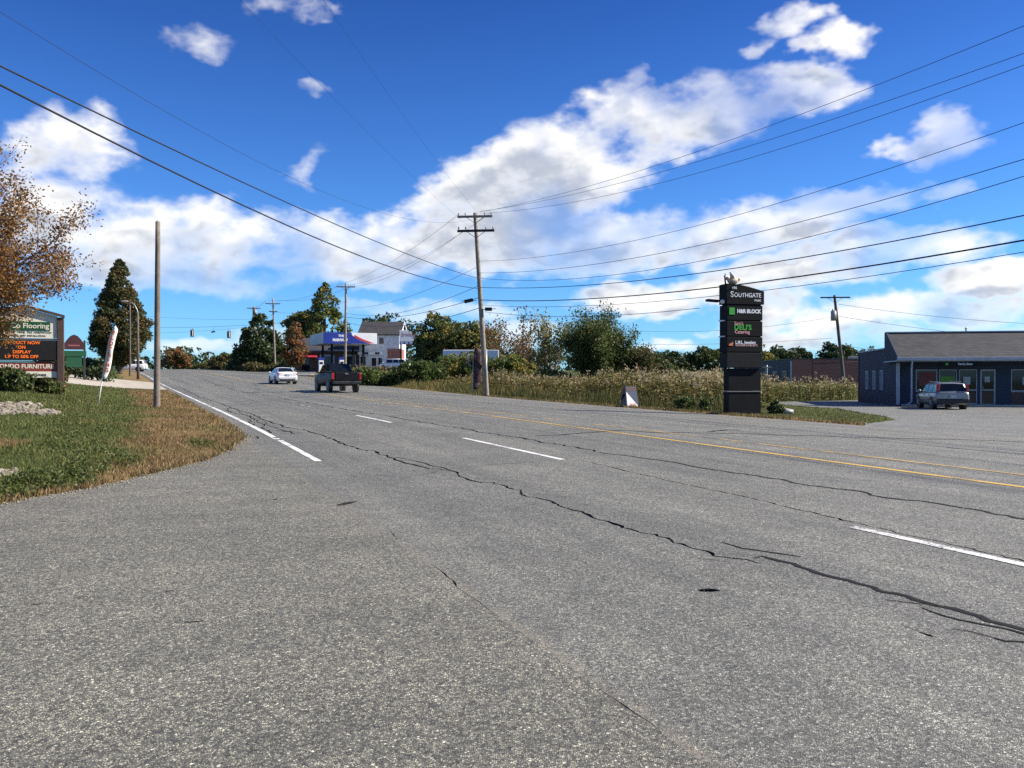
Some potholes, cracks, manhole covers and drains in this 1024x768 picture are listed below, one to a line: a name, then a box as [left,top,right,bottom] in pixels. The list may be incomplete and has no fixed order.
crack [599,689,662,733]
crack [184,389,1024,637]
